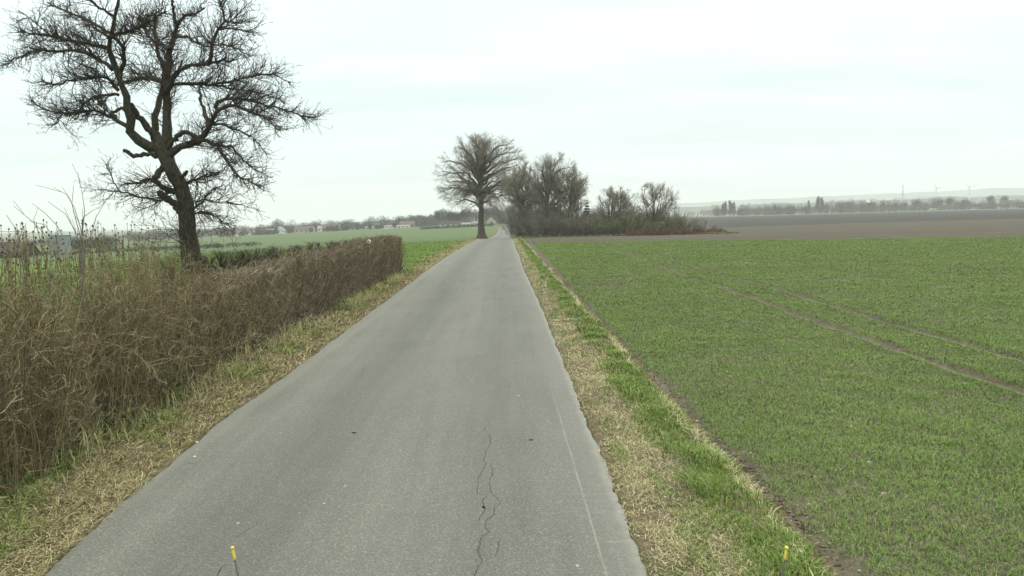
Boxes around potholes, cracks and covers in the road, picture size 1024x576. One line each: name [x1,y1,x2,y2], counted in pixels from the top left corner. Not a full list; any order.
crack [474,438,502,576]
